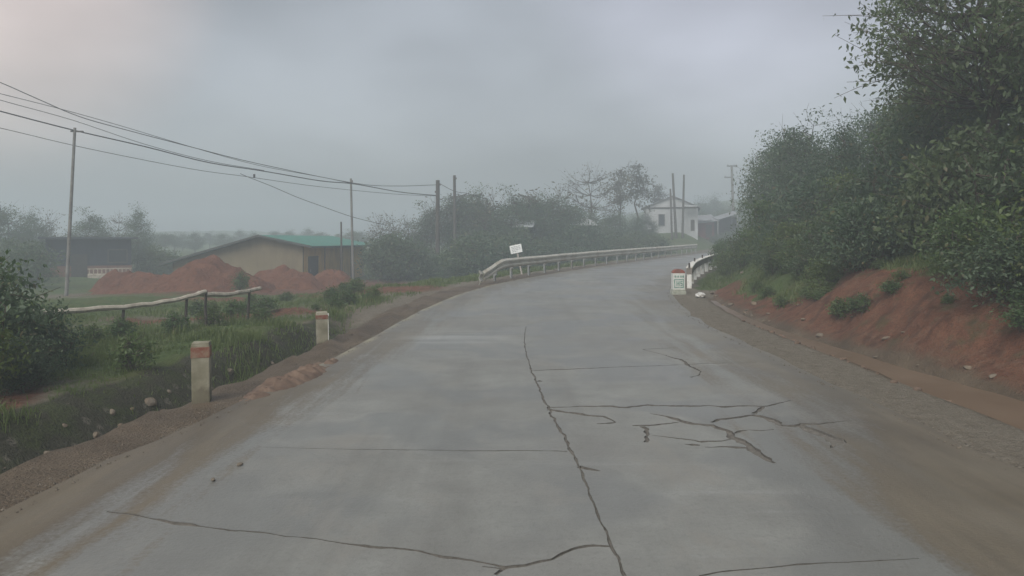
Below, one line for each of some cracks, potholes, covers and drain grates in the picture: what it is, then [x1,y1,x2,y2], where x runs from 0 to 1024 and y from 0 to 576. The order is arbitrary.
crack [109,326,847,576]
crack [699,558,919,576]
